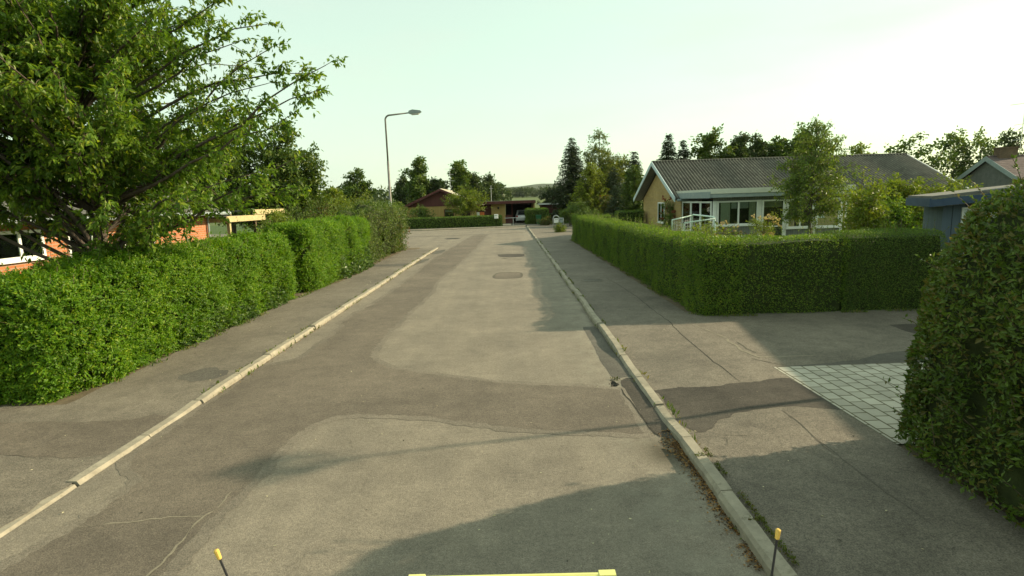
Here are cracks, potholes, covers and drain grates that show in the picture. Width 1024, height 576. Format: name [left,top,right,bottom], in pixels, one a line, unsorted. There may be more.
crack [82,491,232,576]
crack [621,389,659,436]
